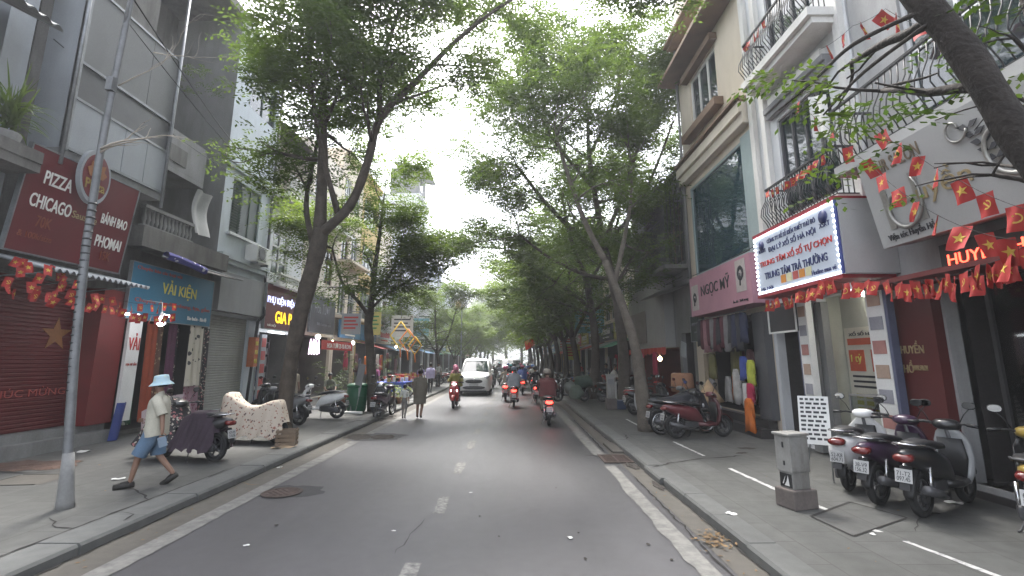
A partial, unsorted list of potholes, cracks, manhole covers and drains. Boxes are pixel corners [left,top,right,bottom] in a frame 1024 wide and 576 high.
crack [653,455,742,467]
utility cover [810,501,907,536]
drain grate [597,454,635,463]
manhole cover [260,487,303,498]
